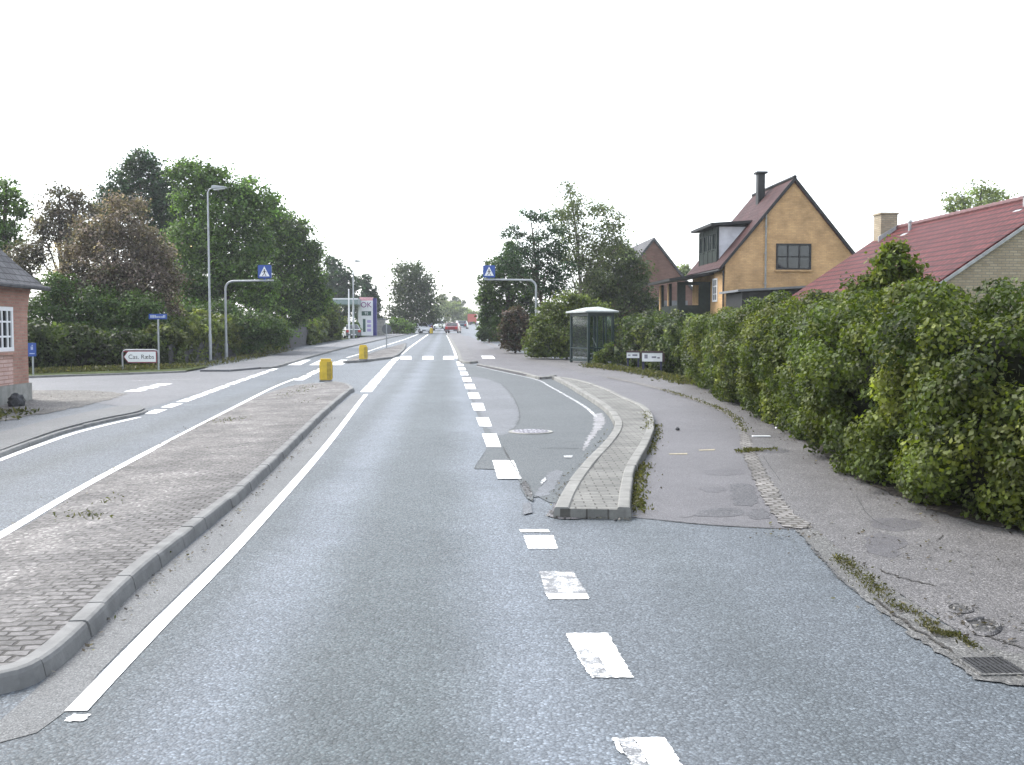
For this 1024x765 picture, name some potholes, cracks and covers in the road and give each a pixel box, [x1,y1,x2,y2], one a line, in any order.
drain grate [953,656,1024,676]
pothole [520,478,534,501]
